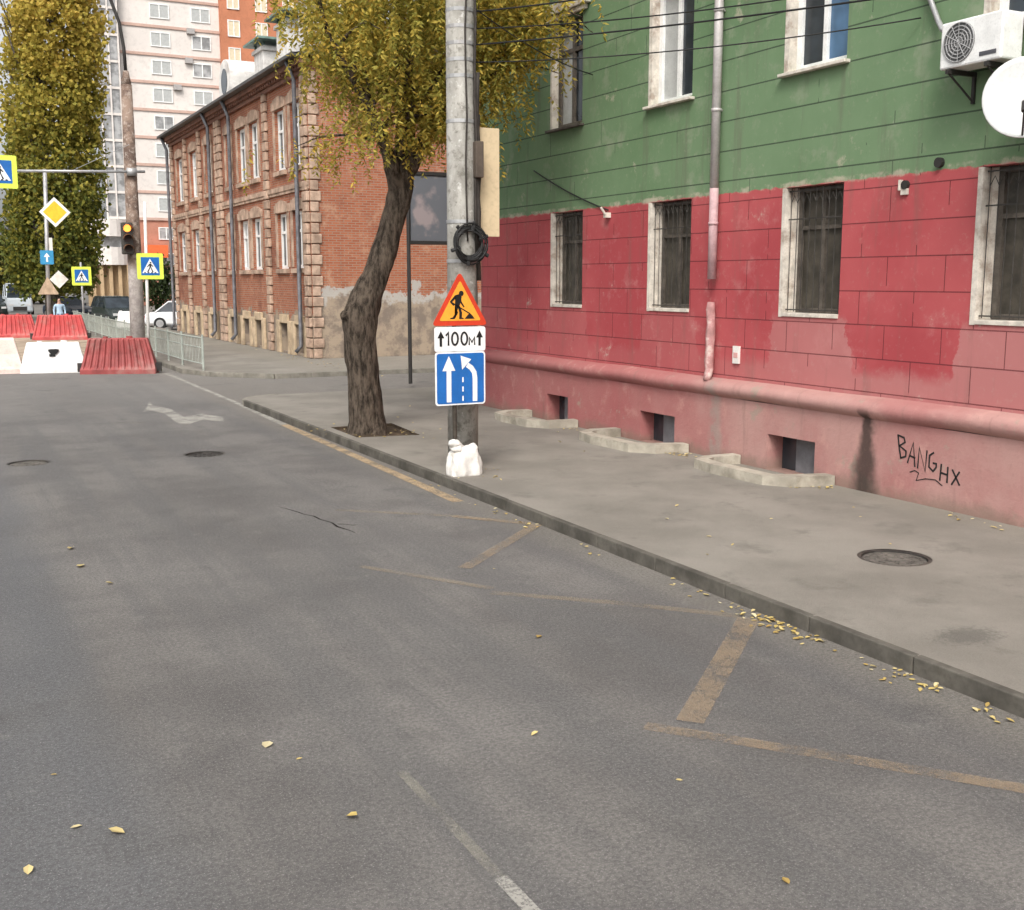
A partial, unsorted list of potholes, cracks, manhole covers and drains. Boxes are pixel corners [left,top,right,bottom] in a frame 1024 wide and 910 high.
manhole cover [857,549,933,566]
crack [281,507,355,533]
